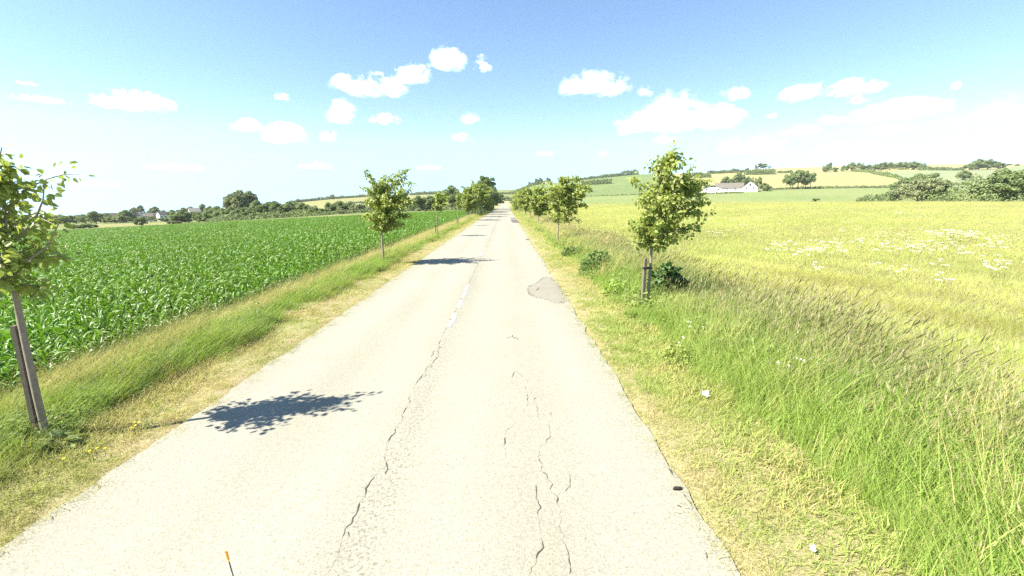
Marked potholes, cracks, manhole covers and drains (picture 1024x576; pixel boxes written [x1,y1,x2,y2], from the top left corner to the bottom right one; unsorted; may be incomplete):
crack [512,374,571,574]
crack [329,262,479,571]
